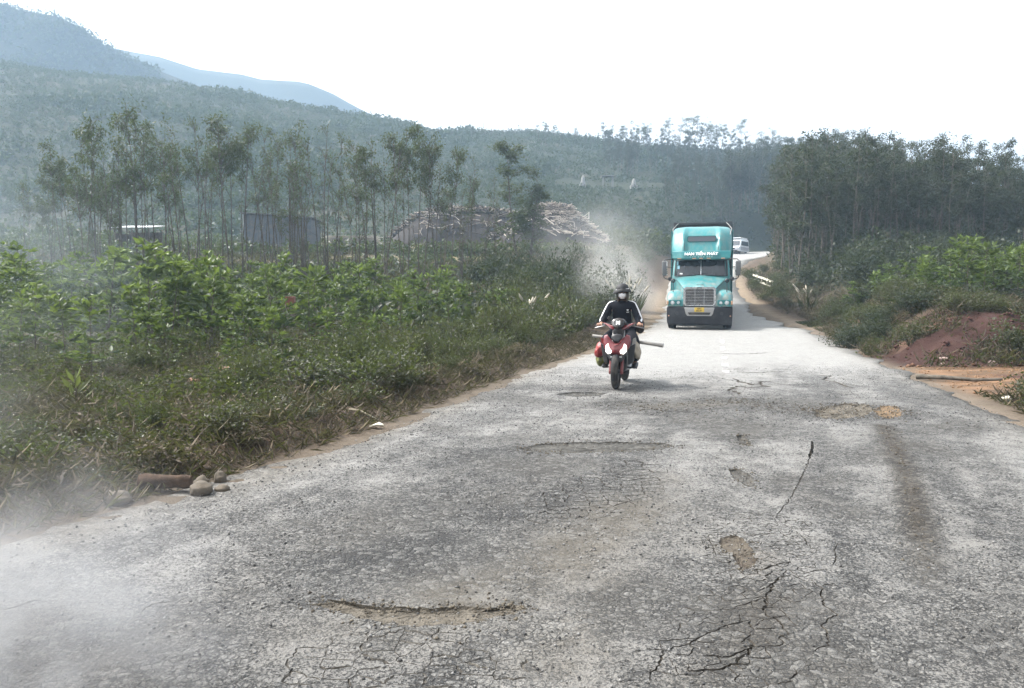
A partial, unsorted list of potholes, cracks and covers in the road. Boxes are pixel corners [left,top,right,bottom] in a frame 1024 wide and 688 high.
pothole [813,403,874,419]
crack [727,371,783,394]
crack [647,442,839,688]
pothole [719,536,757,572]
pothole [873,406,903,418]
pothole [730,469,755,487]
crack [281,626,529,688]
pothole [308,599,526,627]
